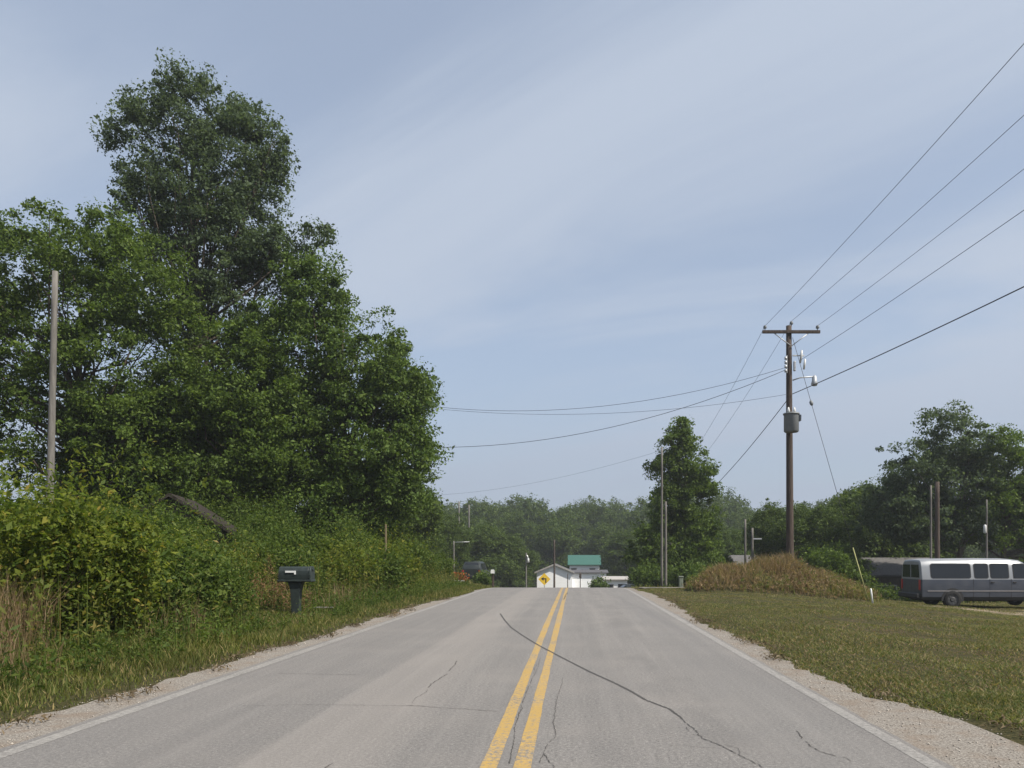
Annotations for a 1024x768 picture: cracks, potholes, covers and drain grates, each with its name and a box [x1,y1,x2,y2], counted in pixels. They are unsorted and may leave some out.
crack [252,596,762,768]
